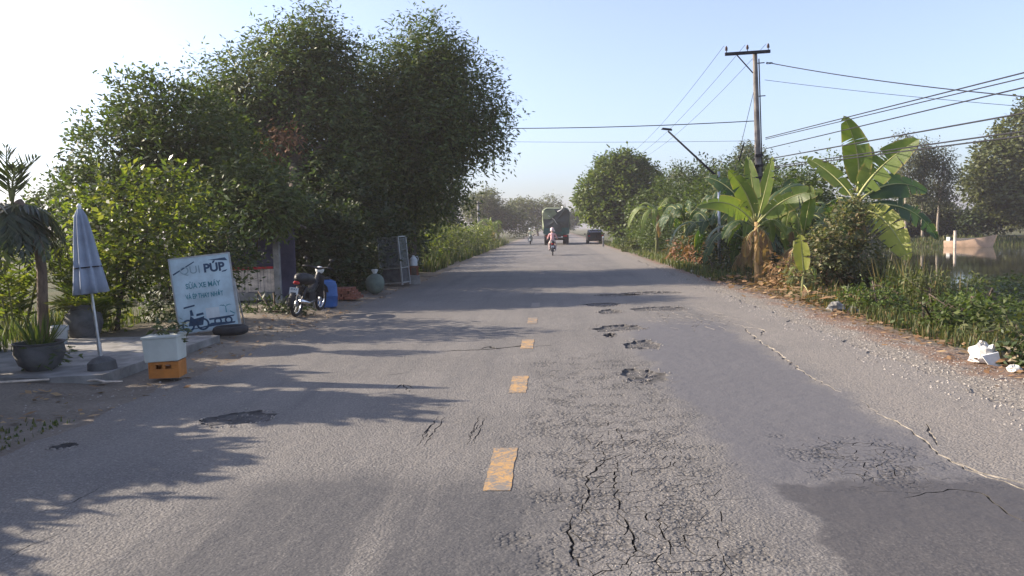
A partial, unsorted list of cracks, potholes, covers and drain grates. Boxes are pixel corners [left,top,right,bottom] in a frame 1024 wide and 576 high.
pothole [621,338,664,351]
pothole [199,408,279,428]
crack [789,402,1024,521]
pothole [45,441,79,450]
crack [467,416,487,445]
pothole [618,367,671,385]
crack [418,407,445,445]
crack [554,402,746,576]
pothole [588,324,649,332]
